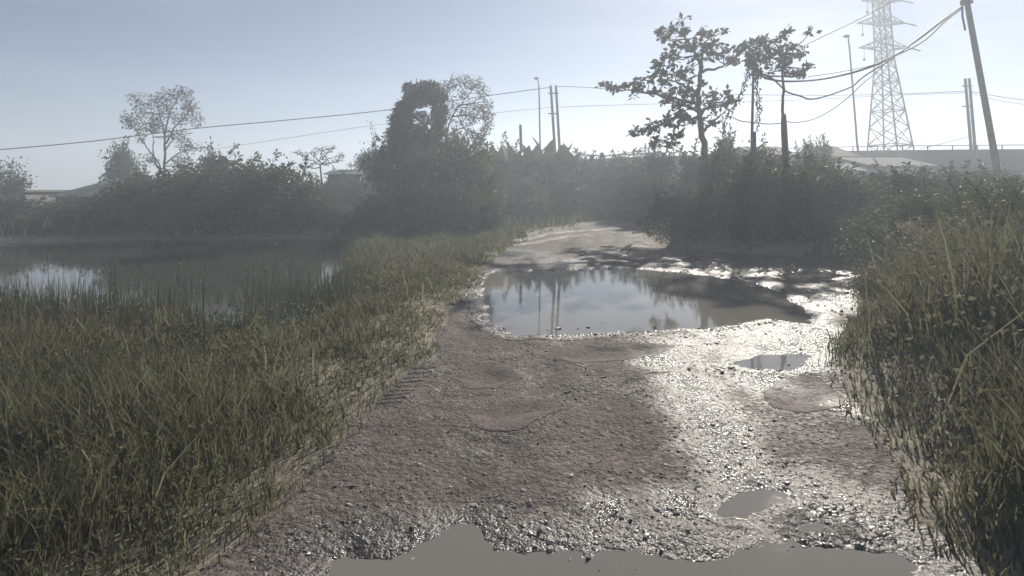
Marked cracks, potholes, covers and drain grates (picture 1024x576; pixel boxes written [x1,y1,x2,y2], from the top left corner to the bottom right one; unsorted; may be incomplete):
pothole [763,374,846,412]
pothole [458,265,847,341]
pothole [465,398,563,431]
pothole [692,476,817,528]
pothole [704,344,841,374]
pothole [279,501,988,576]
